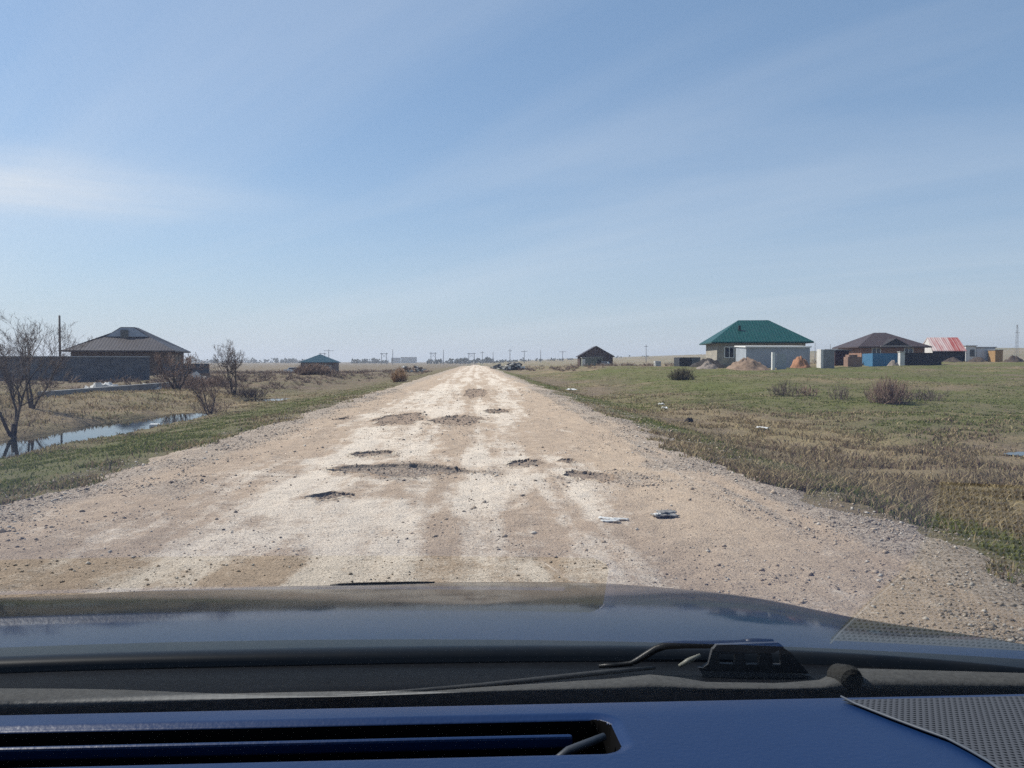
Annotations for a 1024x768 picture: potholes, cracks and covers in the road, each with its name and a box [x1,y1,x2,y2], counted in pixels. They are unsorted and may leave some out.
pothole [426,415,487,426]
pothole [560,469,618,483]
pothole [463,388,488,398]
pothole [505,458,547,468]
pothole [301,491,355,501]
pothole [368,411,427,427]
pothole [347,450,397,458]
pothole [319,463,483,479]
